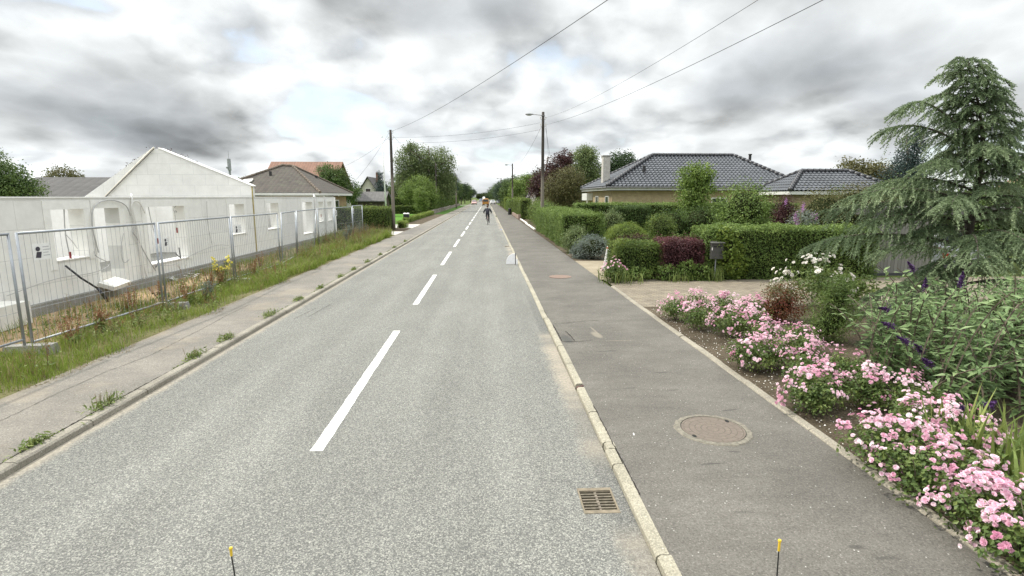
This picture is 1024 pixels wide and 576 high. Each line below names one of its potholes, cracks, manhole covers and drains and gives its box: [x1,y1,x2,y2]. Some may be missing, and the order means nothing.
drain grate [577,487,621,514]
manhole cover [673,415,754,447]
